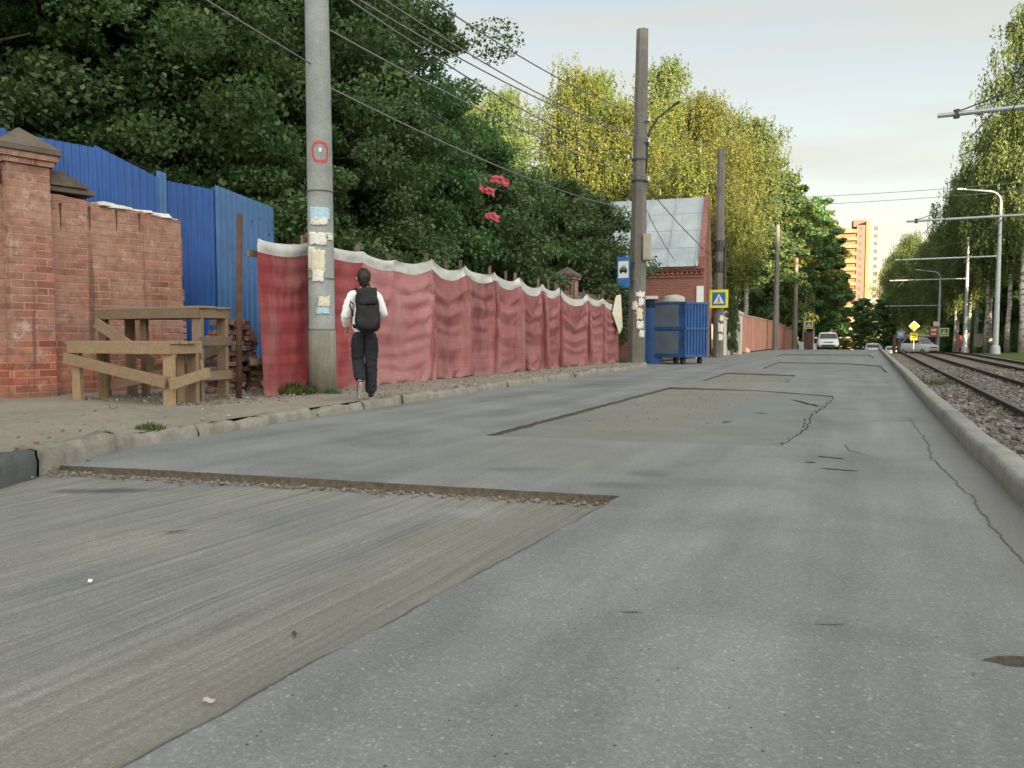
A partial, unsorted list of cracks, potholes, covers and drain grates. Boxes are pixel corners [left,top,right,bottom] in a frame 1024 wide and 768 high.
crack [811,445,869,471]
crack [782,396,866,445]
pothole [981,656,1024,667]
crack [906,419,1024,562]
